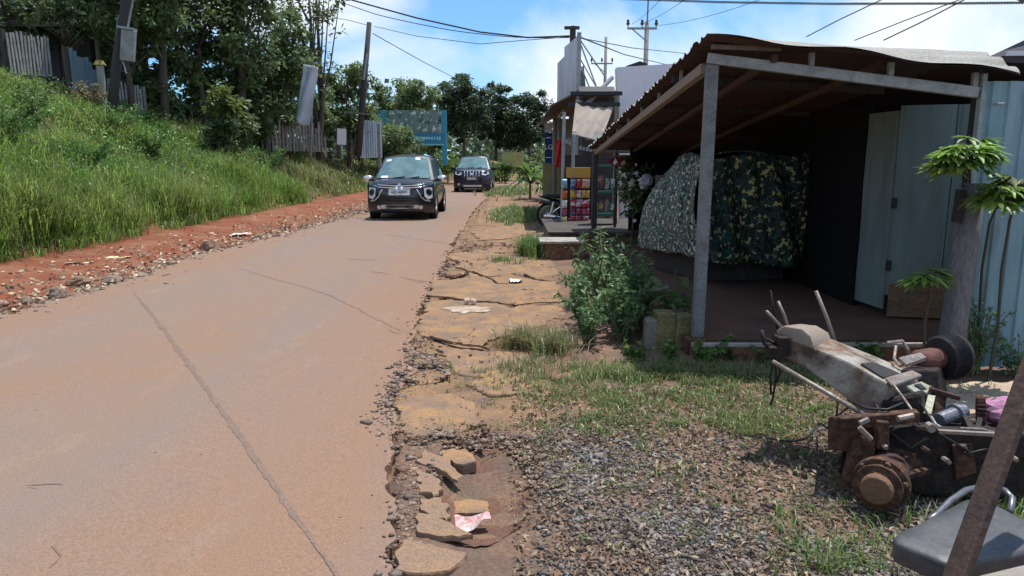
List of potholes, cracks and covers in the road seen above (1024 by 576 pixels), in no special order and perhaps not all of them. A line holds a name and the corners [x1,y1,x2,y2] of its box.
crack [133,269,410,576]
crack [441,296,559,306]
crack [458,270,549,284]
crack [430,336,489,350]
pothole [415,428,543,547]
